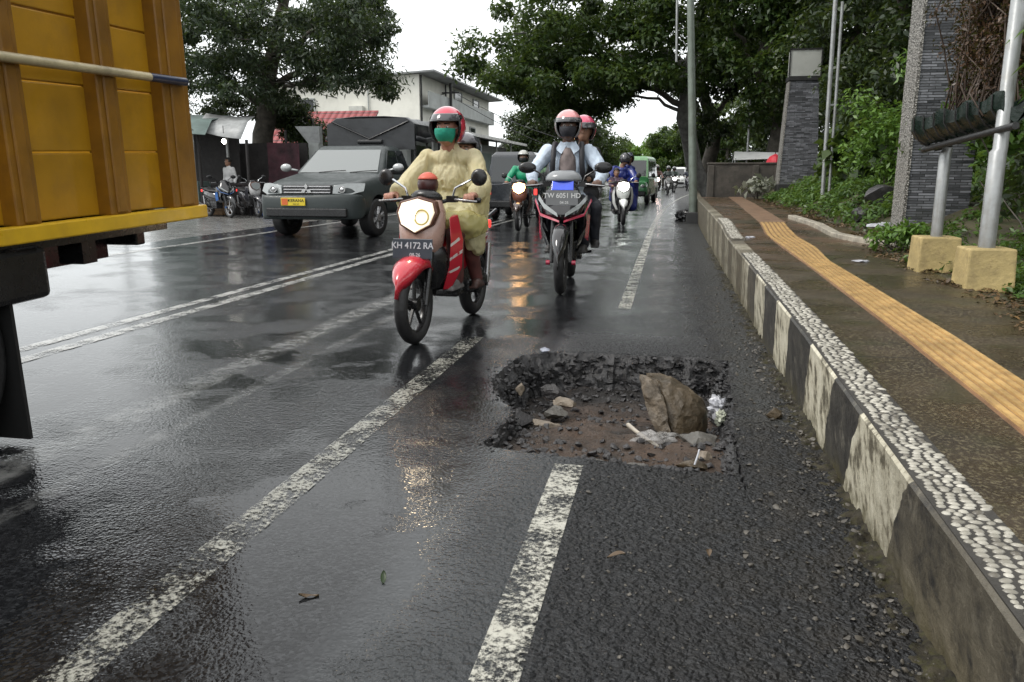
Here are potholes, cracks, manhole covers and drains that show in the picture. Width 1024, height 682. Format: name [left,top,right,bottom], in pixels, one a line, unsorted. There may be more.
crack [731,422,778,490]
pothole [479,352,736,474]
